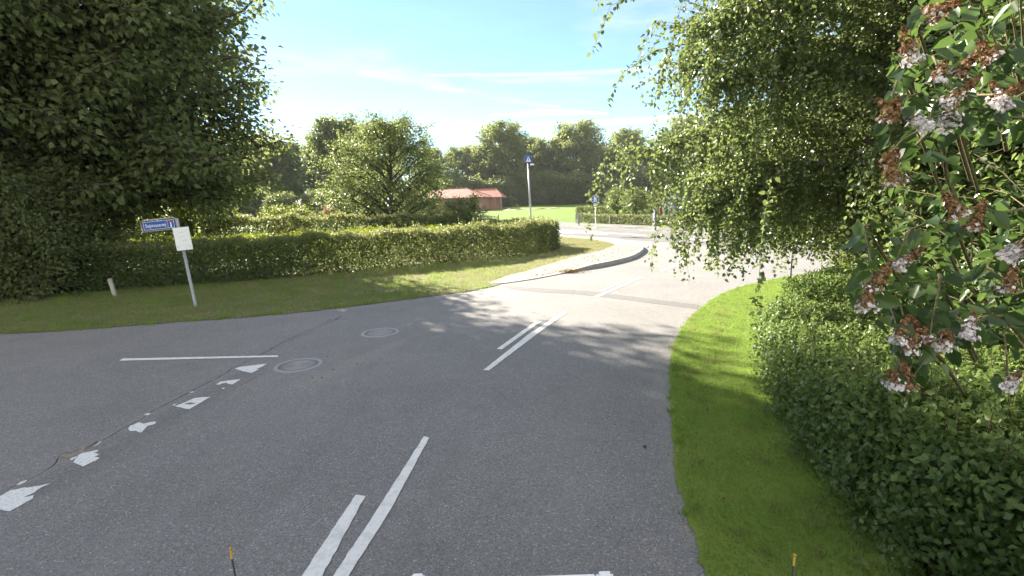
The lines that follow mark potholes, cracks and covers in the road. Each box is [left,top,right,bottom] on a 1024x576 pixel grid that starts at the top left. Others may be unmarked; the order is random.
manhole cover [361,328,399,338]
manhole cover [274,358,323,373]
